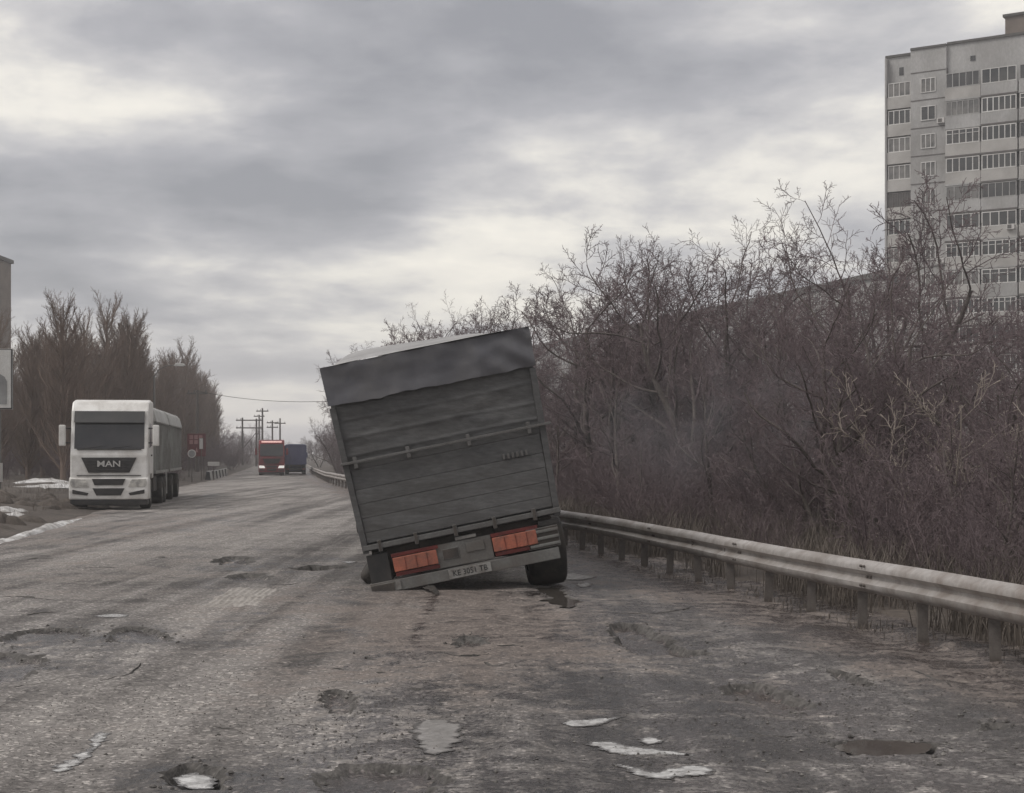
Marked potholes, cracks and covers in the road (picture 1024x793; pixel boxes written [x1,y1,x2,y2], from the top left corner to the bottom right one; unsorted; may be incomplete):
pothole [450,635,491,647]
pothole [533,586,583,609]
pothole [225,573,276,581]
pothole [316,689,359,714]
pothole [0,627,92,649]
pothole [209,556,256,566]
pothole [605,622,713,658]
pothole [827,739,940,756]
pothole [105,626,174,643]
pothole [157,762,234,790]
